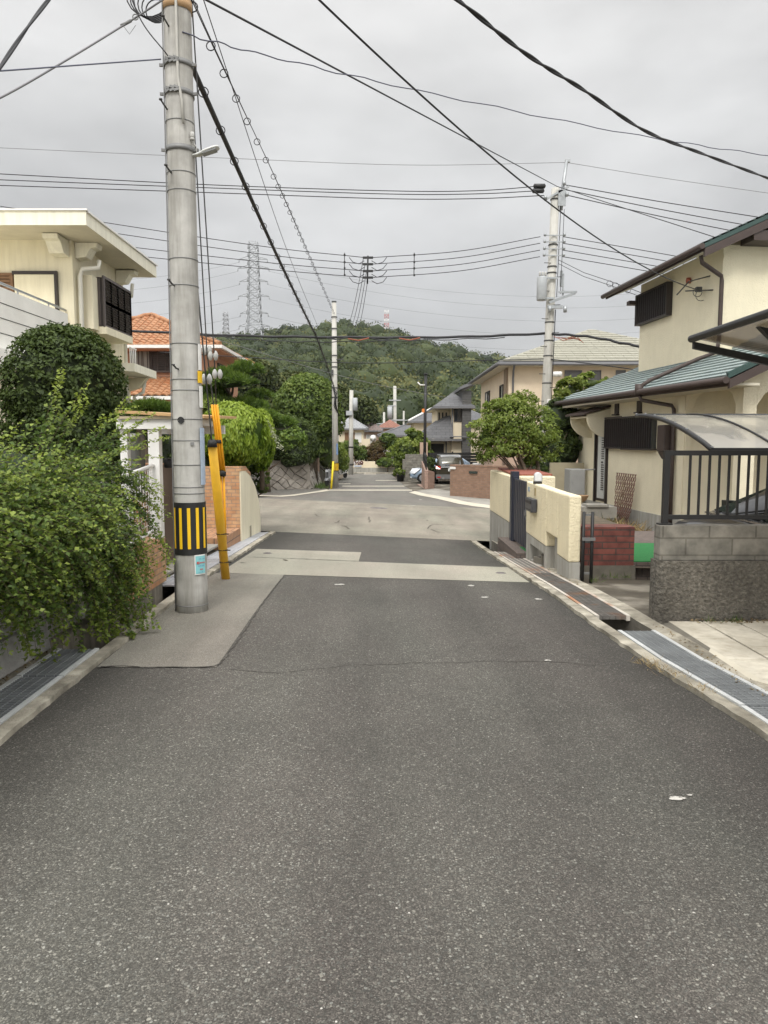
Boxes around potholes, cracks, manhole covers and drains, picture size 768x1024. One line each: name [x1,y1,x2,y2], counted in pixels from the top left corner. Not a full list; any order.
drain grate [503,557,535,565]
drain grate [617,630,704,661]
drain grate [0,676,63,725]
crack [234,661,605,673]
drain grate [17,648,99,677]
drain grate [529,573,572,583]
drain grate [663,659,768,707]
drain grate [515,564,553,573]
drain grate [568,597,630,621]
drain grate [546,583,598,597]
